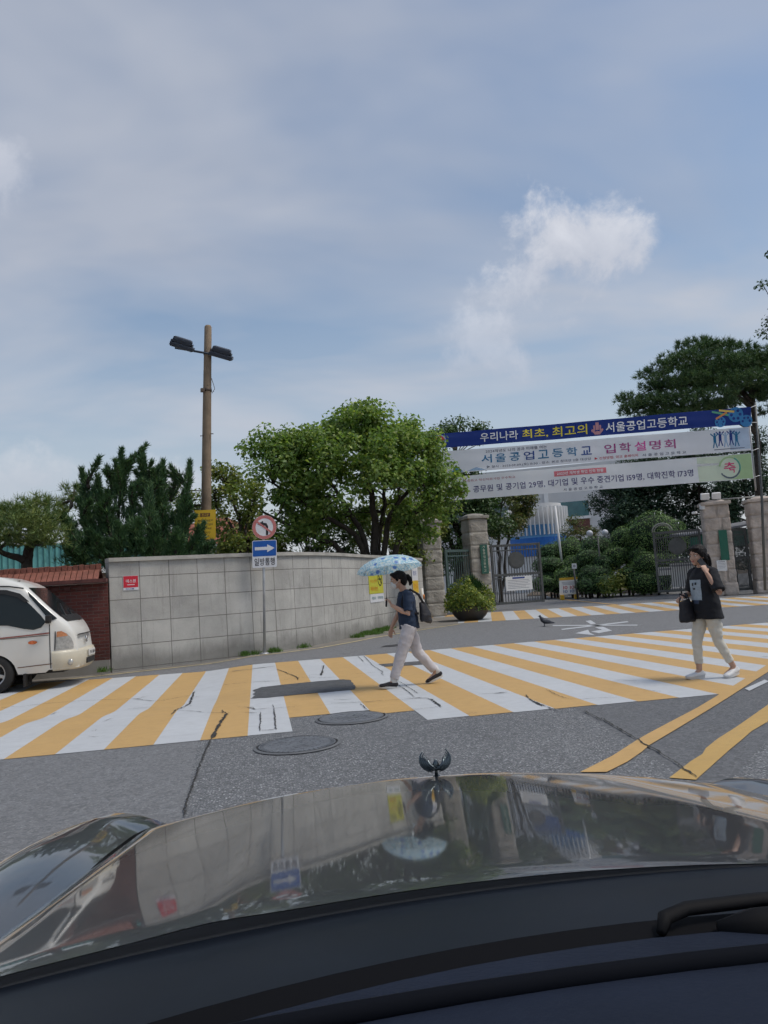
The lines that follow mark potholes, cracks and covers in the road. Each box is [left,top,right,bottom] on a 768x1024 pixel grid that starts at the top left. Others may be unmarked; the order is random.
manhole cover [253,735,341,755]
crack [248,704,280,730]
crack [334,656,442,709]
crack [16,688,229,816]
manhole cover [315,711,388,725]
